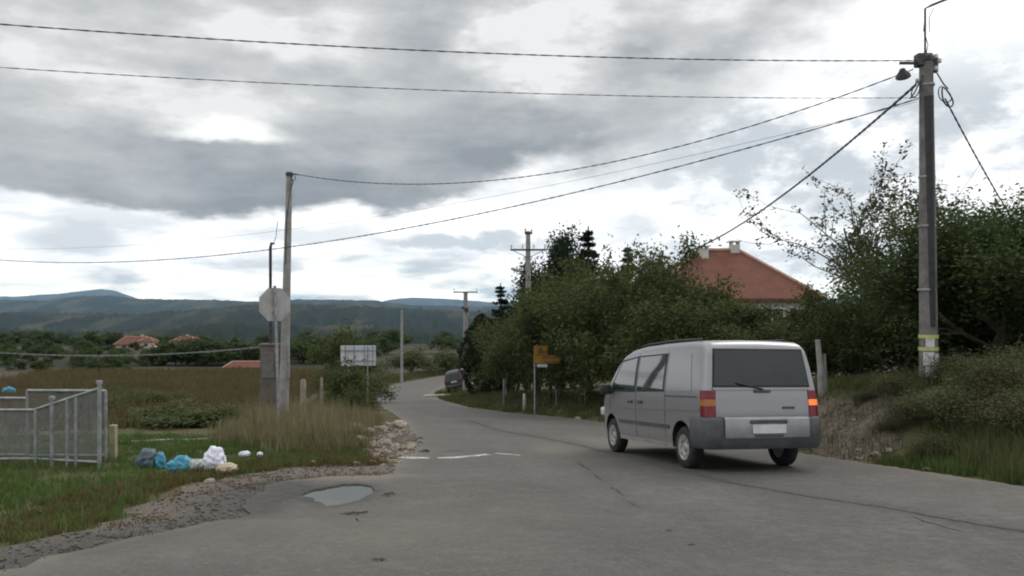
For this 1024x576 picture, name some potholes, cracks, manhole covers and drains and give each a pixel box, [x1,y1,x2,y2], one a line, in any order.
pothole [301,484,375,506]
